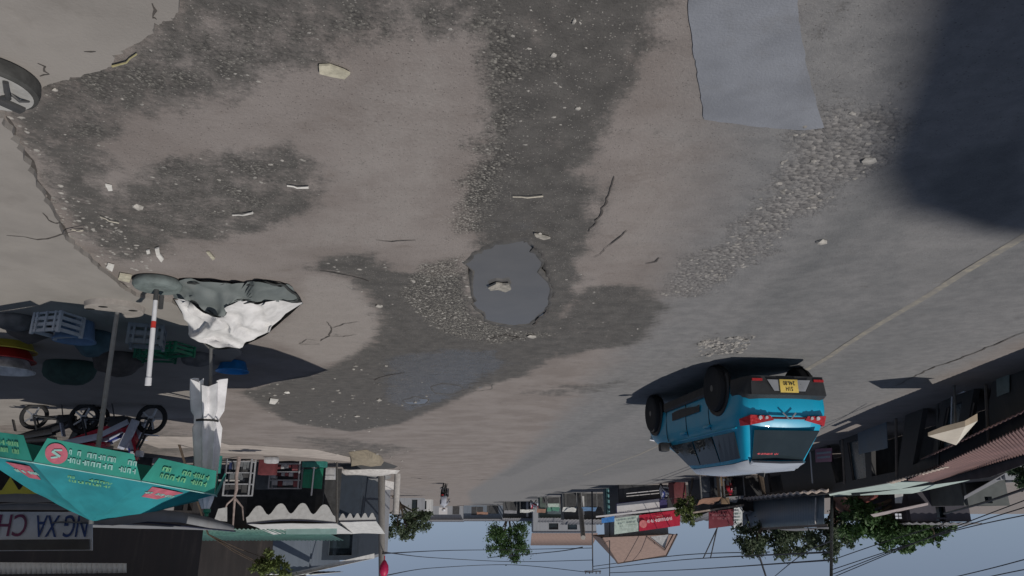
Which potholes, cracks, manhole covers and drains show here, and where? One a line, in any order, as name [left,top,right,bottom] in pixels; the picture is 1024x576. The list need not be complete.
crack [6,117,128,288]
pothole [462,236,553,327]
crack [589,176,627,256]
crack [302,322,355,345]
